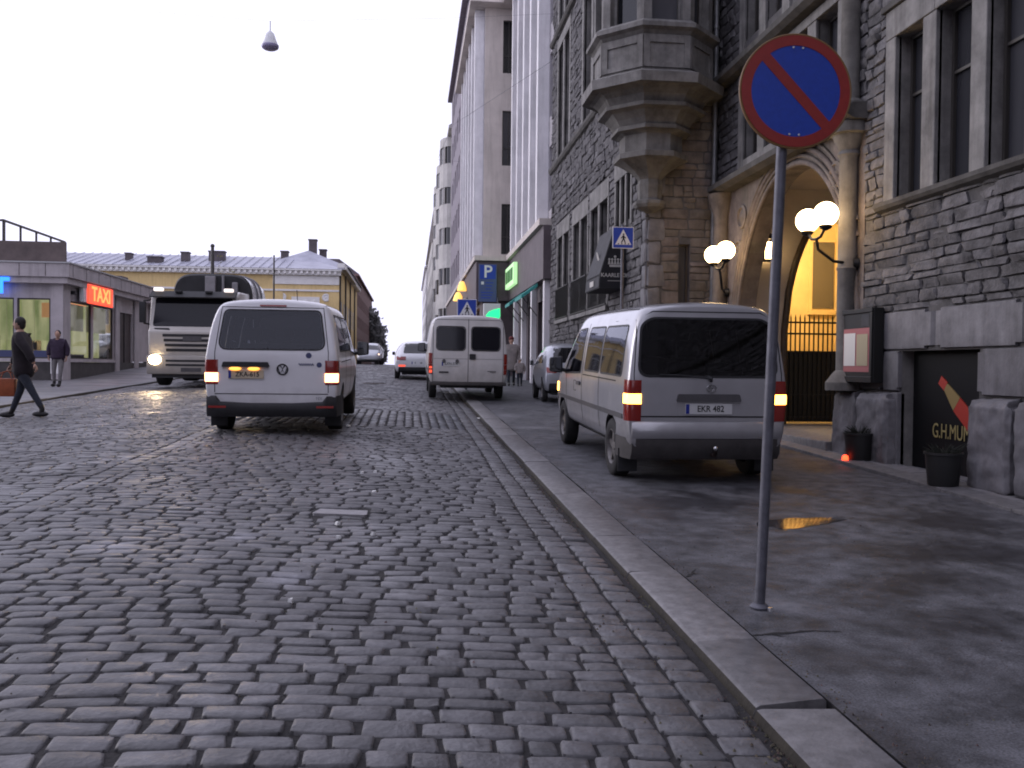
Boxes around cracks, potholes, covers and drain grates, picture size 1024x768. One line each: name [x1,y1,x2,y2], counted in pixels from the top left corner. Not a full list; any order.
manhole cover [313,509,368,518]
